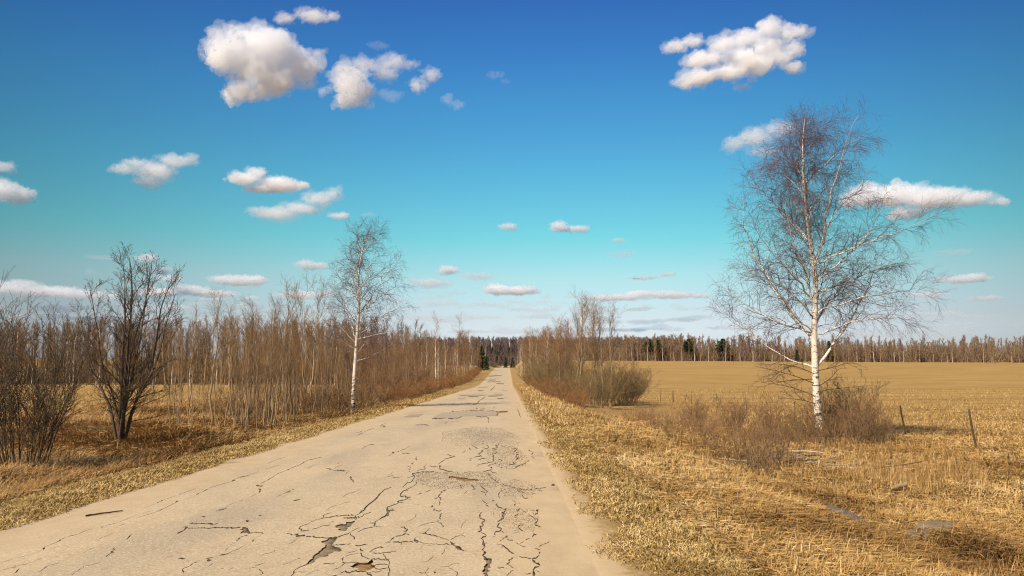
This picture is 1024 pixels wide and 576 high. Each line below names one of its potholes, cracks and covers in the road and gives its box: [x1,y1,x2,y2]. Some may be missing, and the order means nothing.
pothole [307,538,342,564]
crack [4,381,549,576]
pothole [350,560,375,572]
